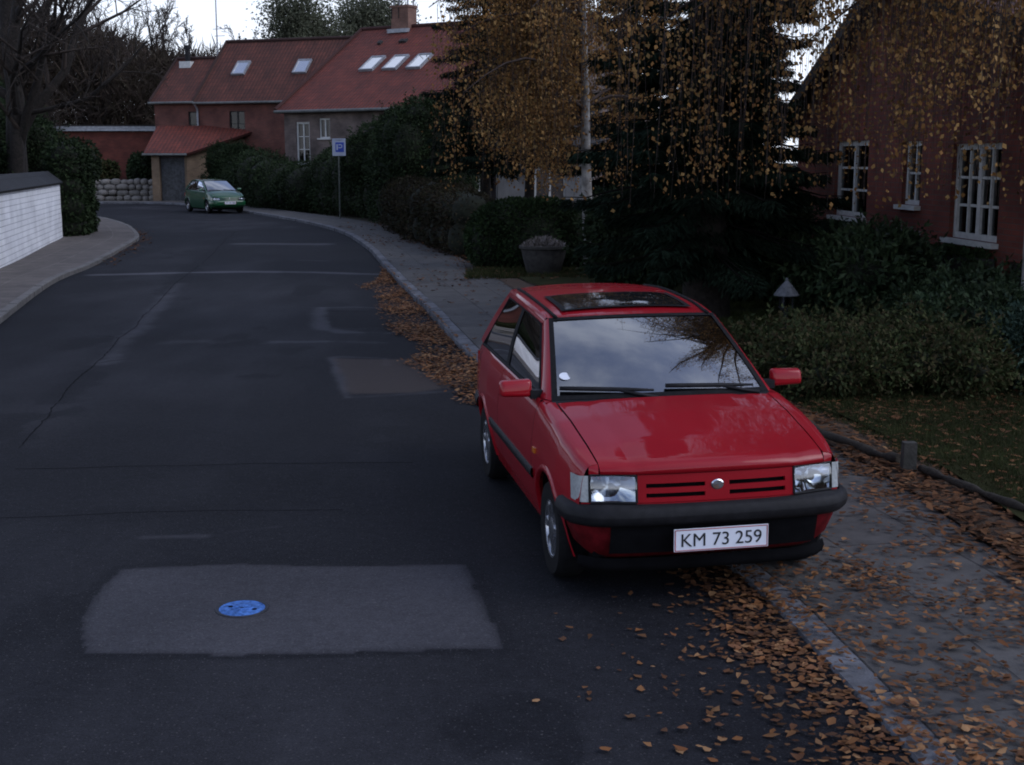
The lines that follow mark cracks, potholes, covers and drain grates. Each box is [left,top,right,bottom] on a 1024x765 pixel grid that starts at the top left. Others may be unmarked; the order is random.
manhole cover [215,599,269,618]
crack [19,233,234,448]
